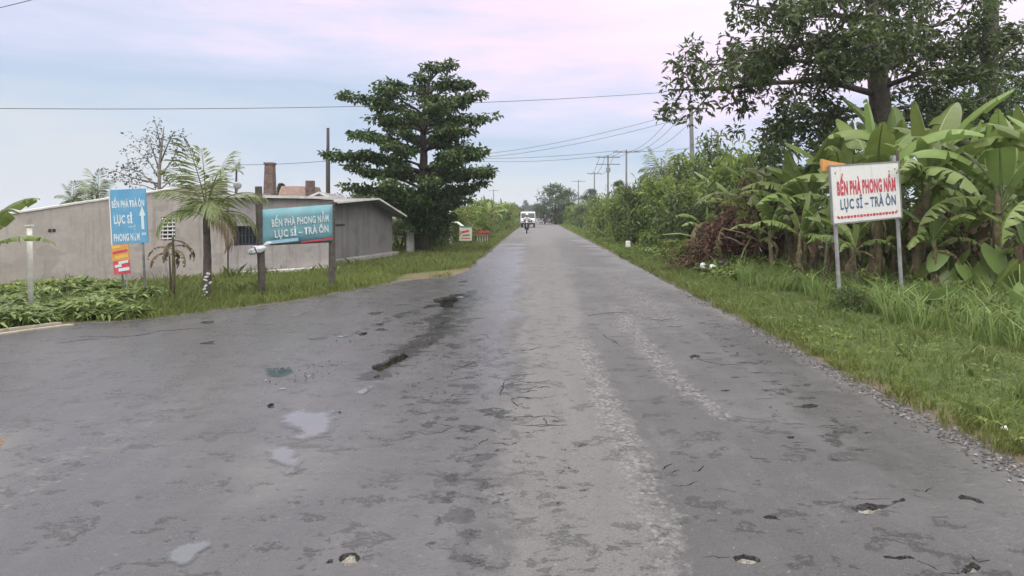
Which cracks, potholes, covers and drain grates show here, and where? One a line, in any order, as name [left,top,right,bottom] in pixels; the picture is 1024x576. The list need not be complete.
crack [413,373,567,446]
crack [54,328,201,344]
pothole [372,352,410,372]
pothole [423,294,471,309]
pothole [961,562,981,574]
pothole [339,553,361,566]
pothole [733,554,760,564]
pothole [851,498,906,514]
crack [663,463,704,487]
